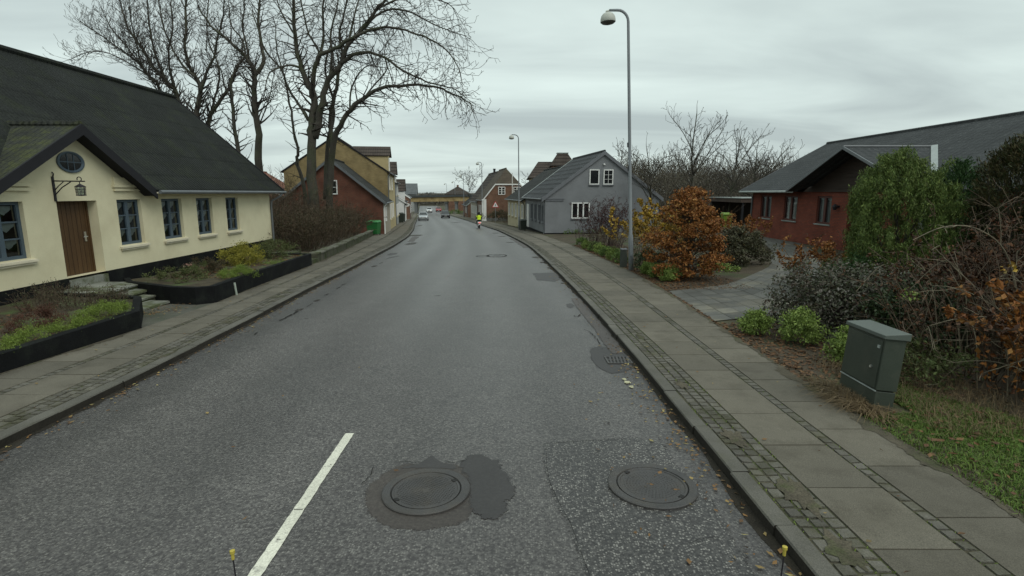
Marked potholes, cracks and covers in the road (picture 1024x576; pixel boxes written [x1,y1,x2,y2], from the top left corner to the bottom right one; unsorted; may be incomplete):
drain grate [604,356,633,364]
manhole cover [381,468,470,516]
manhole cover [608,463,698,510]
